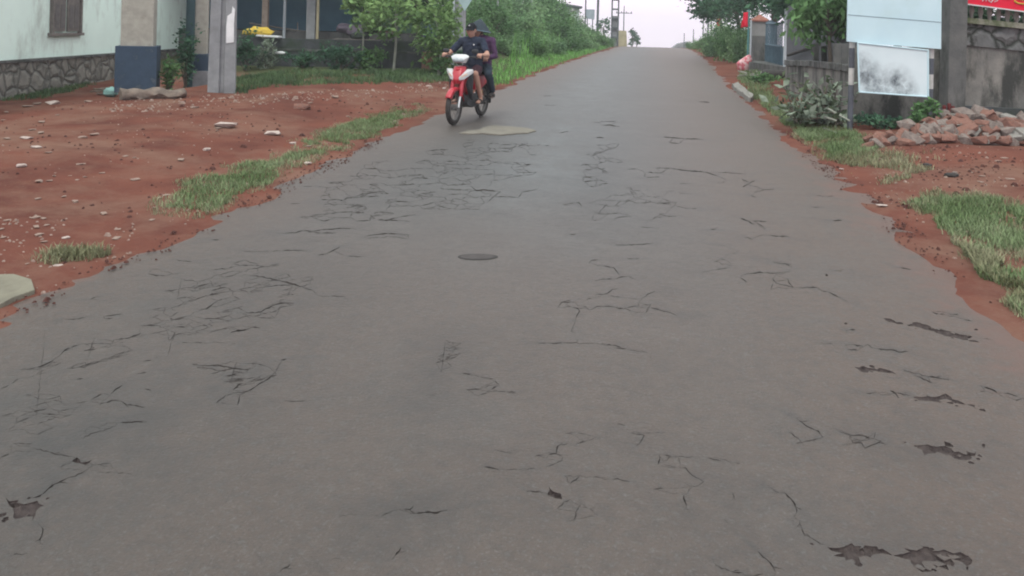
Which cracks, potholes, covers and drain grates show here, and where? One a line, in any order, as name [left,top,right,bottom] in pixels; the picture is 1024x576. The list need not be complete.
crack [486,424,740,521]
pothole [883,318,978,342]
pothole [0,497,50,522]
pothole [914,394,985,411]
crack [551,342,651,357]
crack [1,131,569,569]
crack [558,121,771,332]
pothole [855,365,895,374]
pothole [904,441,982,464]
pothole [810,543,972,572]
